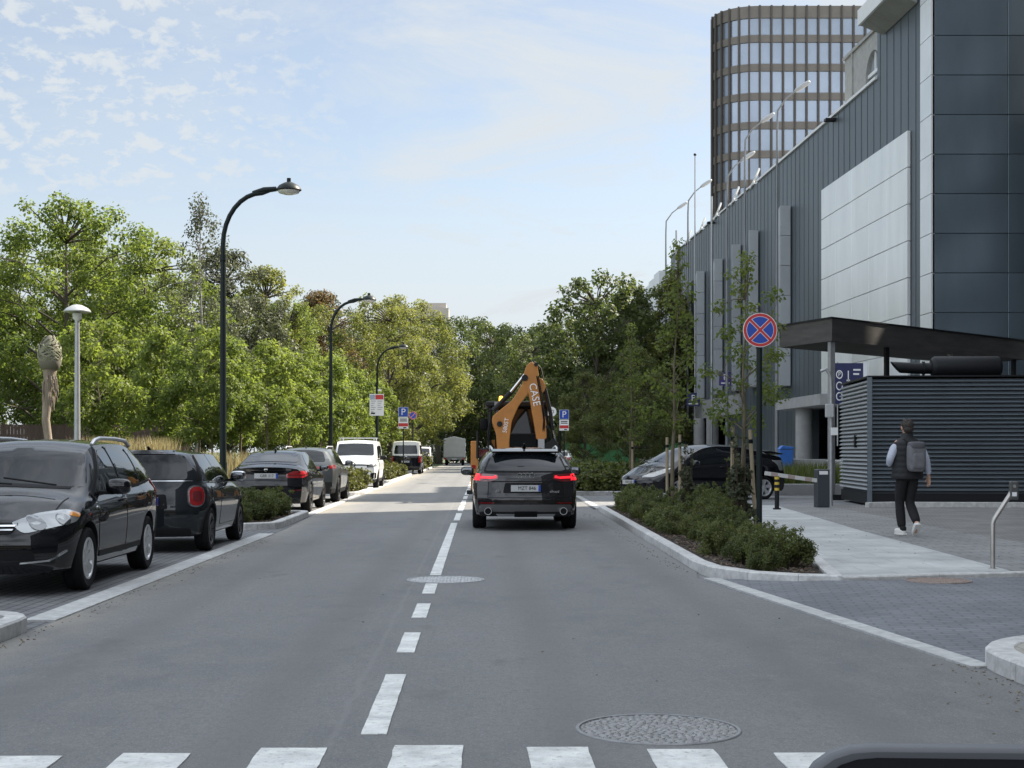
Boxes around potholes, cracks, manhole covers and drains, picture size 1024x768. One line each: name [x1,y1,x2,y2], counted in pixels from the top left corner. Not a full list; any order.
manhole cover [576,713,742,746]
